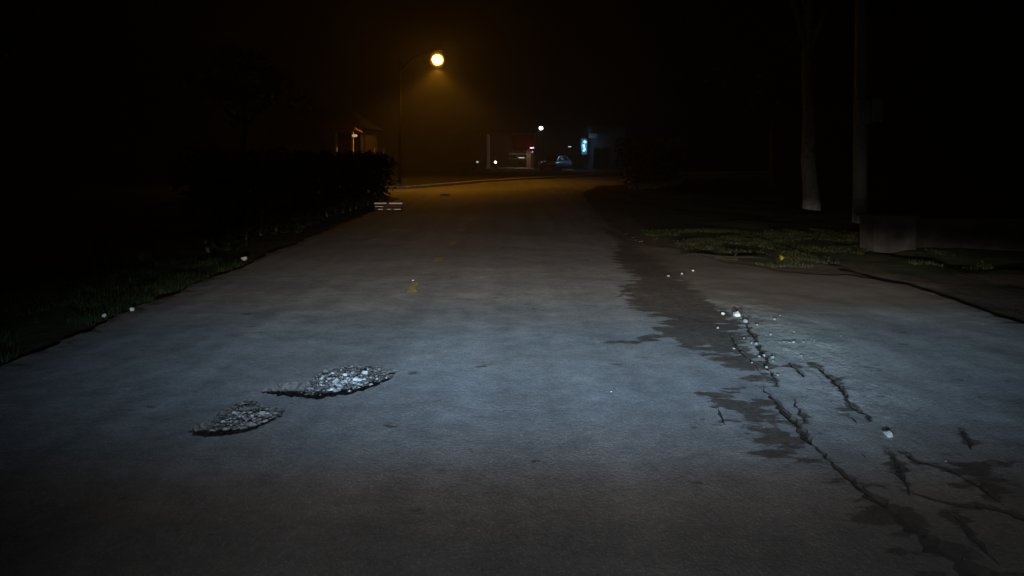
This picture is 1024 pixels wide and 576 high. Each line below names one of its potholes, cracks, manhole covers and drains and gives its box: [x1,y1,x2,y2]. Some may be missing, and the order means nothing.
pothole [261,365,397,400]
crack [728,318,1024,576]
pothole [189,400,285,437]
